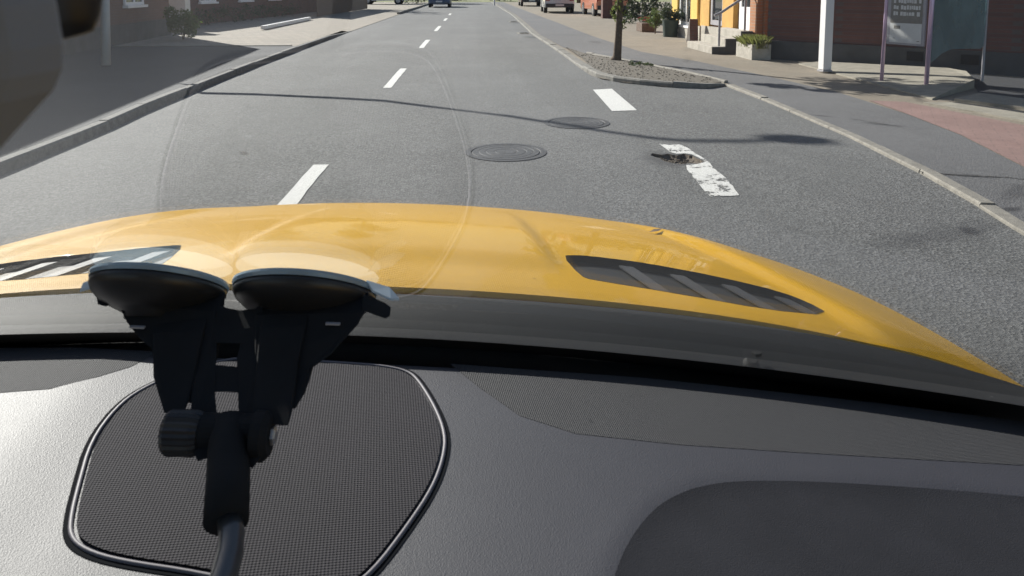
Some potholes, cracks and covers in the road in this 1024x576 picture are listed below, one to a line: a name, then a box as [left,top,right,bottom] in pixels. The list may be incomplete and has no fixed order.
manhole cover [544,117,610,129]
manhole cover [465,143,547,162]
pothole [651,153,704,164]
